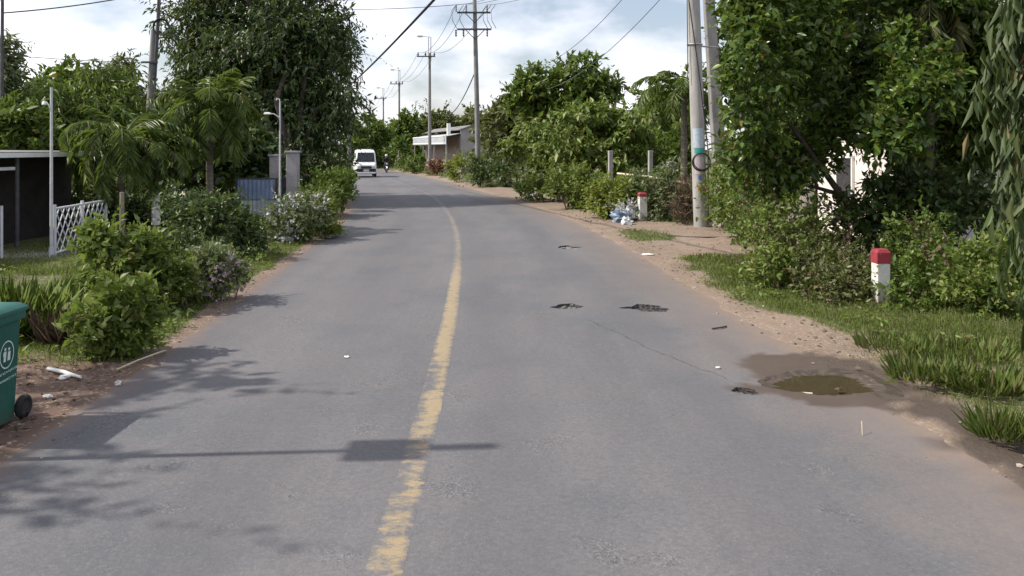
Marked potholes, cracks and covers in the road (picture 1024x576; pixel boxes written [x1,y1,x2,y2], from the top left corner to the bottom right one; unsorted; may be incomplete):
pothole [621,304,669,312]
crack [586,319,728,380]
pothole [731,387,759,395]
pothole [747,368,904,399]
